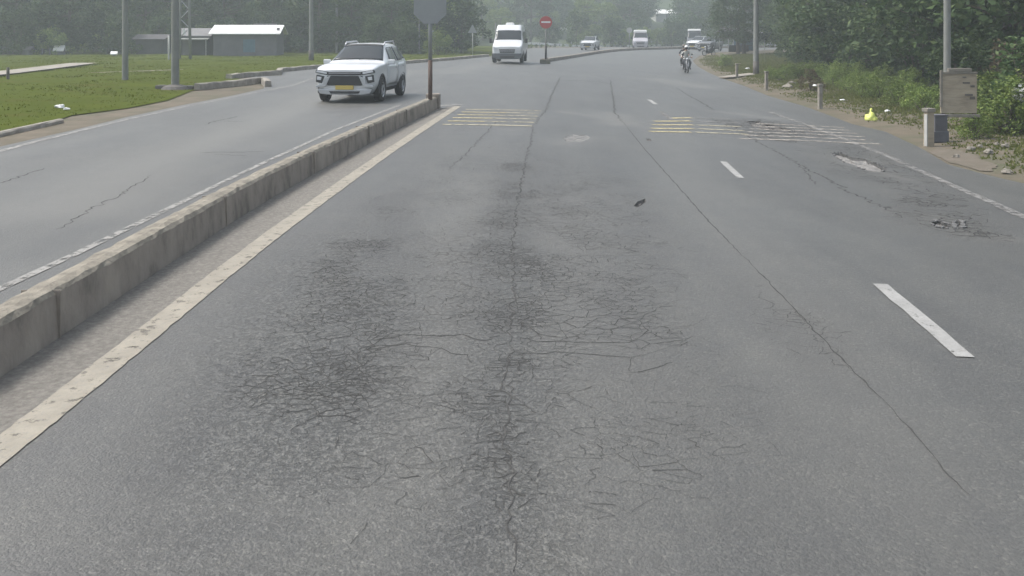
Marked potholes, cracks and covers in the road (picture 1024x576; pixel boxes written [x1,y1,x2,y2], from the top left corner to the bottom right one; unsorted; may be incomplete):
pothole [830,152,887,172]
crack [224,77,864,571]
crack [62,175,150,228]
crack [679,89,1017,242]
pothole [950,219,968,229]
pothole [929,219,952,229]
